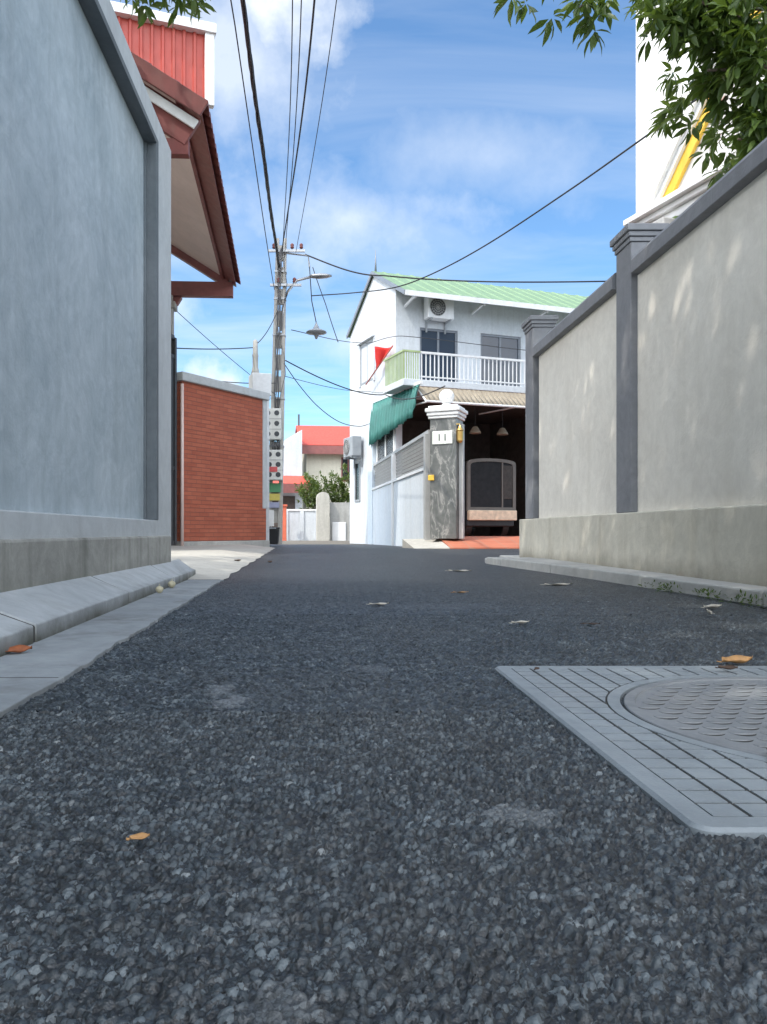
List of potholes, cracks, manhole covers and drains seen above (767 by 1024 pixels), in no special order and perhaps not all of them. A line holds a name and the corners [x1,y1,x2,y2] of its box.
manhole cover [495,666,767,840]
